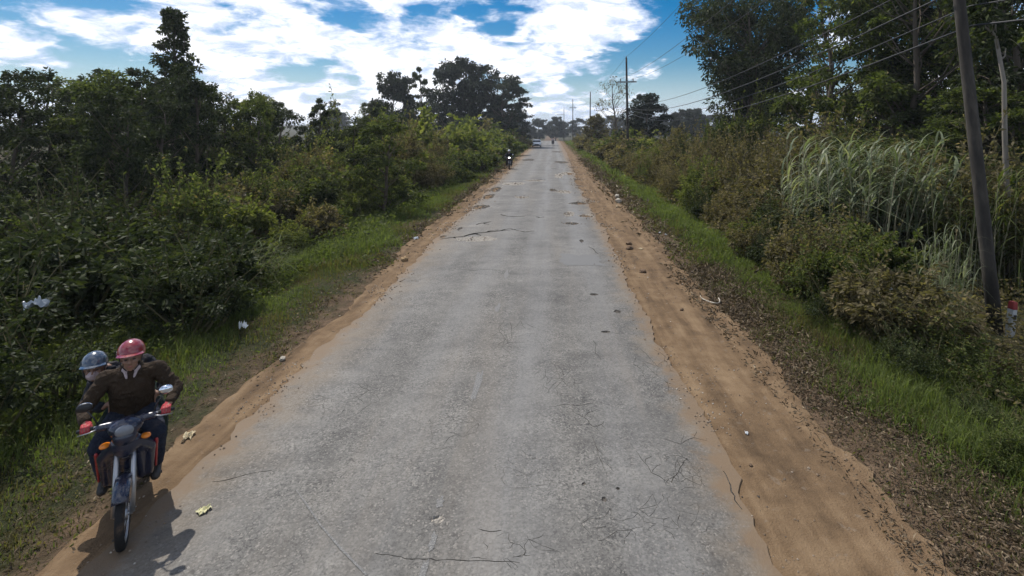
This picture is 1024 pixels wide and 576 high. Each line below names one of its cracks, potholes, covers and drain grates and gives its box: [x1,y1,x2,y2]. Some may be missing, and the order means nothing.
crack [443,214,541,239]
crack [375,529,559,569]
crack [581,432,707,547]
crack [545,368,610,474]
